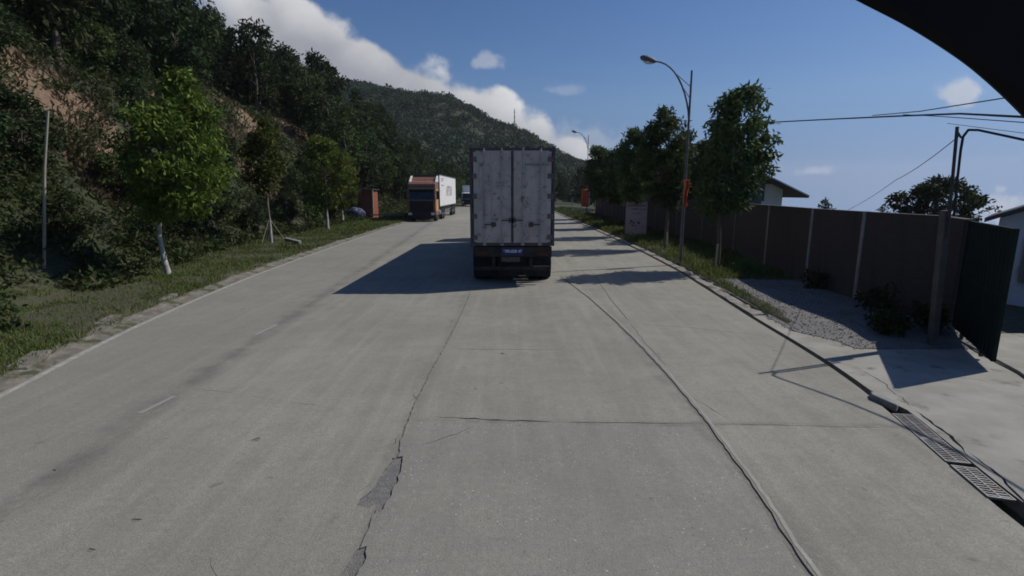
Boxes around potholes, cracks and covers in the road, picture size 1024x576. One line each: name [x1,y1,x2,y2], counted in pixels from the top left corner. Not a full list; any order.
pothole [357,456,403,513]
drain grate [919,437,971,466]
drain grate [950,464,1017,503]
drain grate [891,413,942,440]
pothole [340,546,367,576]
